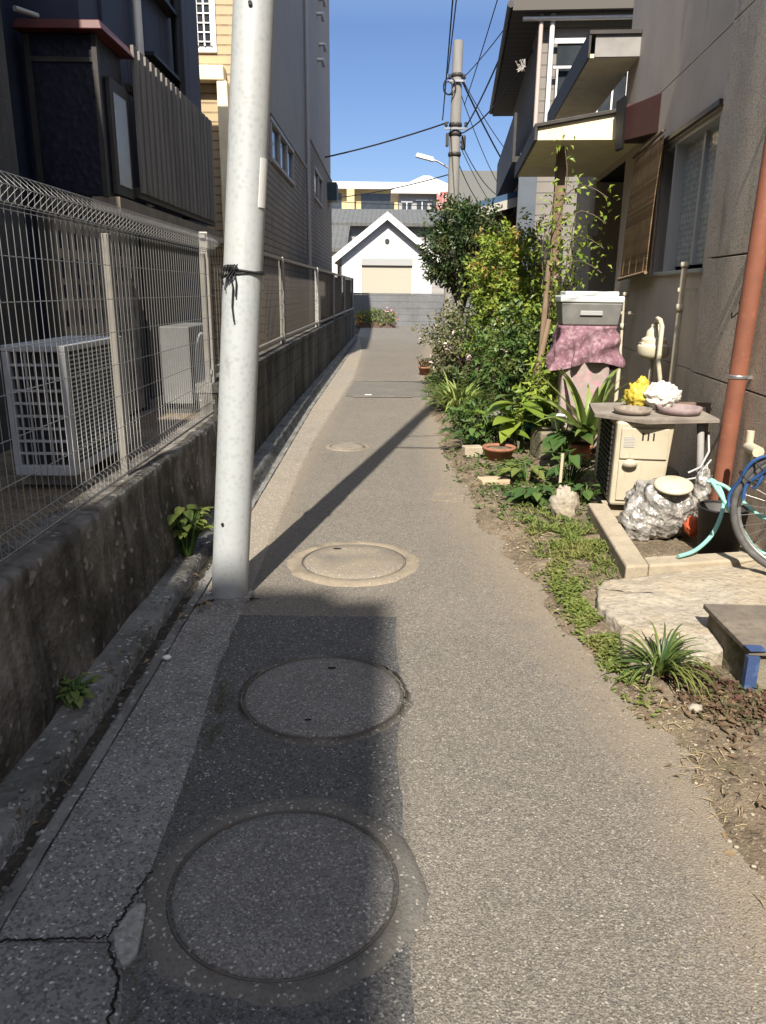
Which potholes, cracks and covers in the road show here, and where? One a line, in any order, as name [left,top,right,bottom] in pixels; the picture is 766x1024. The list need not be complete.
manhole cover [286,541,420,587]
manhole cover [143,797,430,1007]
manhole cover [237,654,413,746]
manhole cover [326,442,370,451]
crack [0,870,153,1024]
